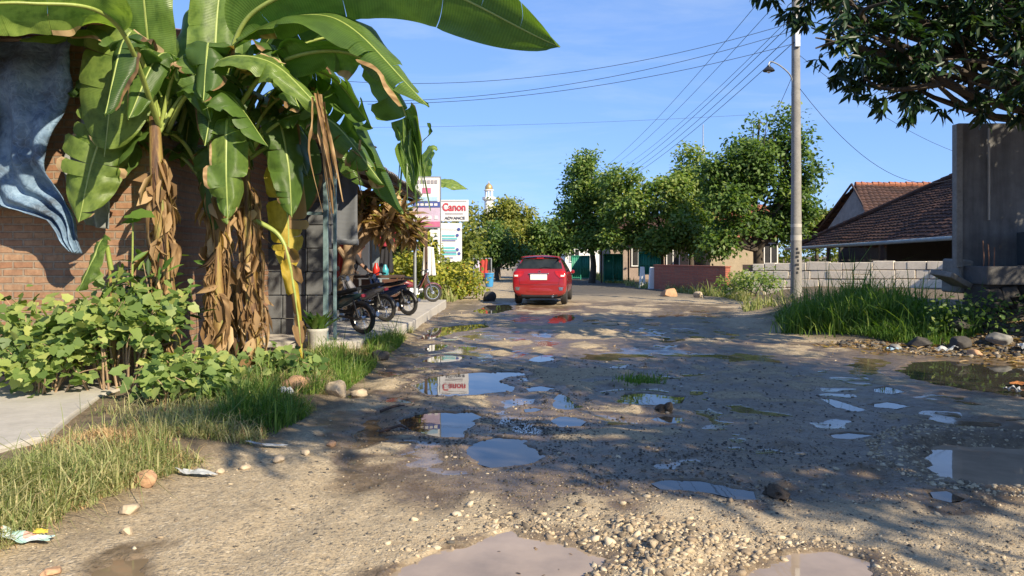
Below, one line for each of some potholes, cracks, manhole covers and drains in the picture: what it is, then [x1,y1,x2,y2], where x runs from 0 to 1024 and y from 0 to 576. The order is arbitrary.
pothole [644,476,763,501]
pothole [547,392,590,411]
pothole [889,359,1024,400]
pothole [415,322,493,341]
pothole [815,397,875,412]
pothole [375,527,619,576]
pothole [456,434,553,470]
pothole [416,354,469,363]
pothole [879,427,1024,490]
pothole [408,370,533,397]
pothole [393,410,487,438]
pothole [607,391,690,406]
